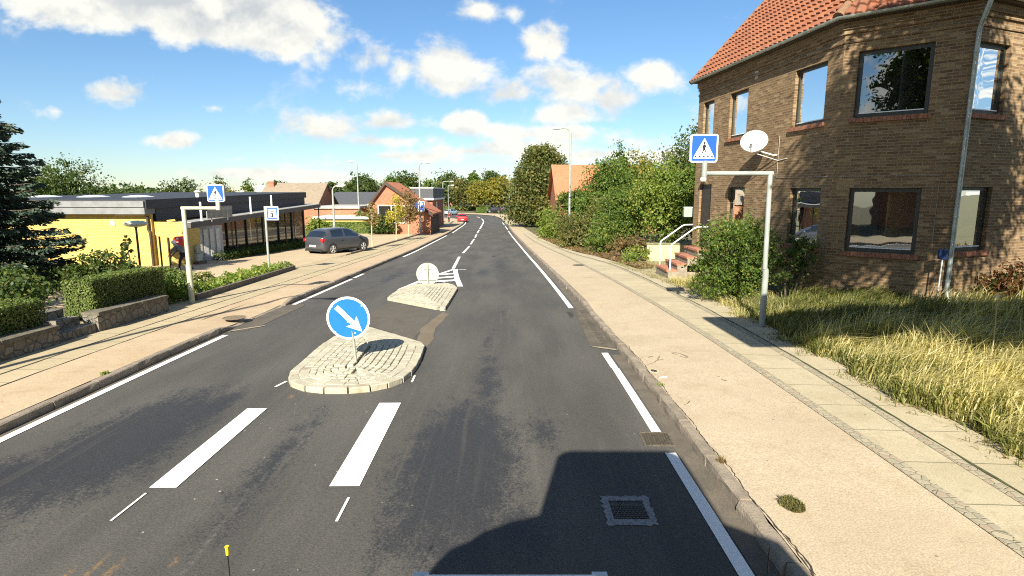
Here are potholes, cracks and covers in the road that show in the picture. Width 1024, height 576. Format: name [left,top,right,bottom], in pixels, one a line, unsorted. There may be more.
drain grate [638,432,676,446]
